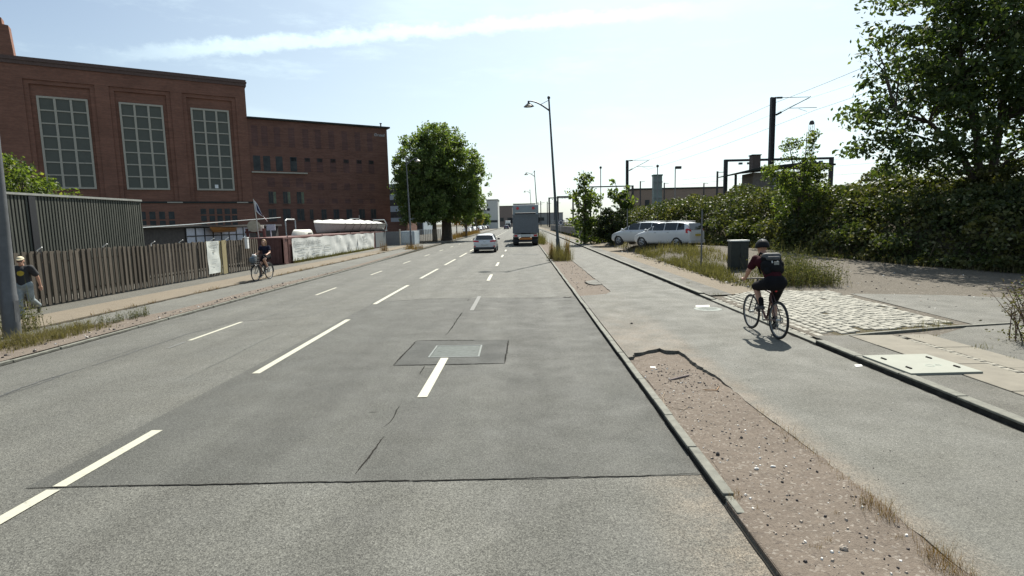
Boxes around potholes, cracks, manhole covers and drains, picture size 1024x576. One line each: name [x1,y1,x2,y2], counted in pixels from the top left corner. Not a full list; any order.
manhole cover [862,354,983,375]
crack [385,298,509,373]
manhole cover [428,345,482,358]
crack [34,407,686,488]
